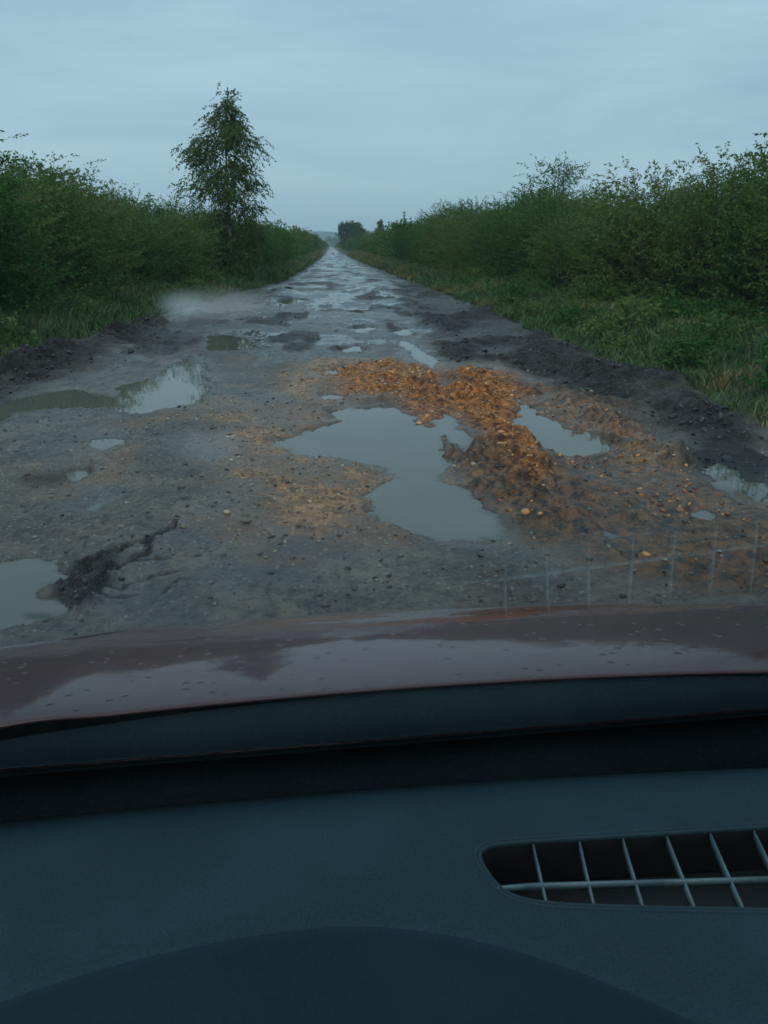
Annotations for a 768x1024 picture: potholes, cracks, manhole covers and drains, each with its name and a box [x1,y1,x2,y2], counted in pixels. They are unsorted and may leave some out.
crack [70,517,192,606]
pothole [46,460,105,484]
pothole [494,394,625,460]
pothole [262,394,532,551]
pothole [68,433,140,452]
pothole [196,330,263,351]
pothole [0,354,220,422]
pothole [388,337,446,369]
pothole [689,451,768,506]
